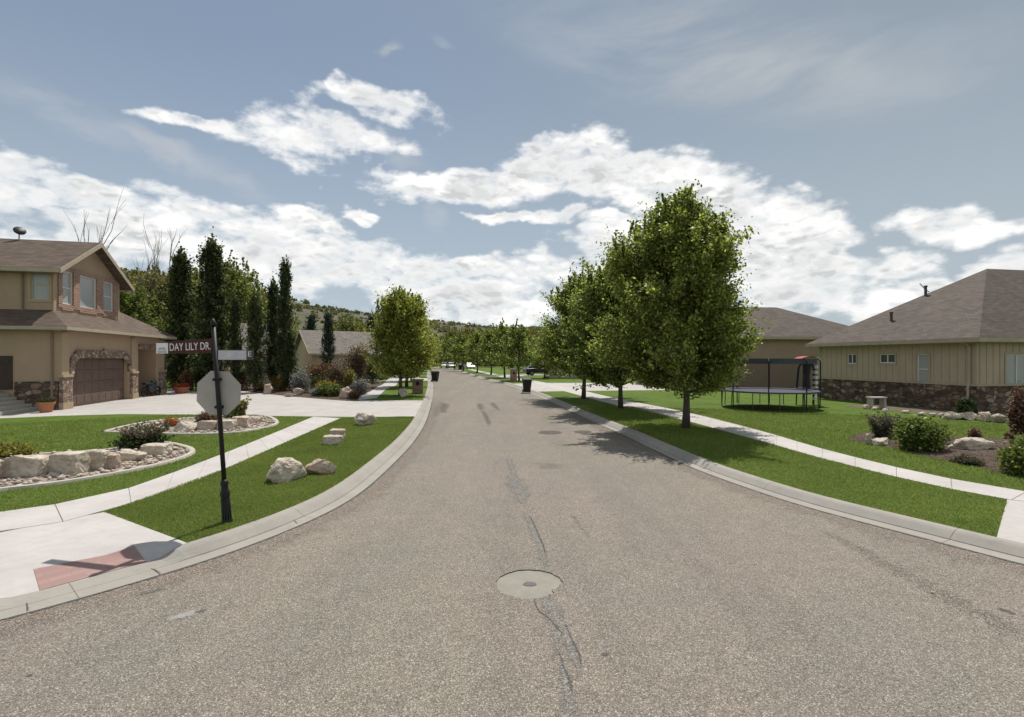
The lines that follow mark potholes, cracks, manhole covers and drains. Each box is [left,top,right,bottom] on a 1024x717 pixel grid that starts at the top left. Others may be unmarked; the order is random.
manhole cover [496,570,563,599]
crack [534,598,582,691]
